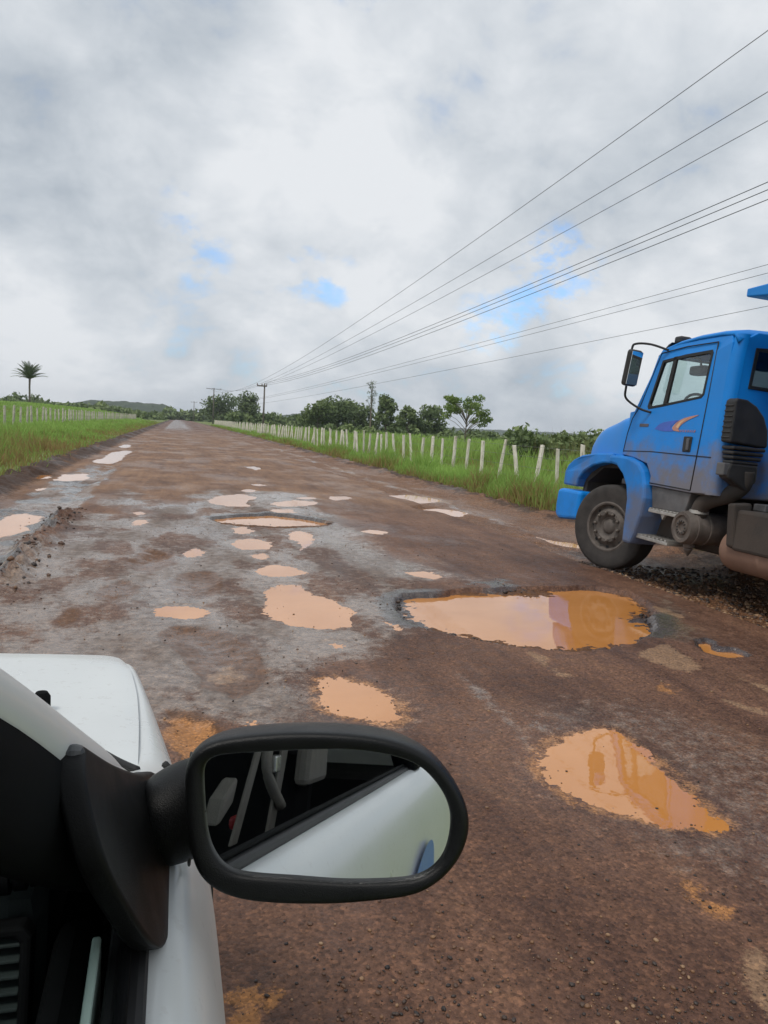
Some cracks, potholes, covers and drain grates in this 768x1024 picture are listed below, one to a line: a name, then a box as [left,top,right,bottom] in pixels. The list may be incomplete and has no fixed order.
pothole [229,579,386,642]
pothole [210,535,287,553]
pothole [173,510,366,532]
pothole [225,561,344,581]
pothole [349,575,727,676]
pothole [449,698,768,897]
pothole [266,529,341,555]
pothole [107,598,240,624]
pothole [181,492,275,509]
